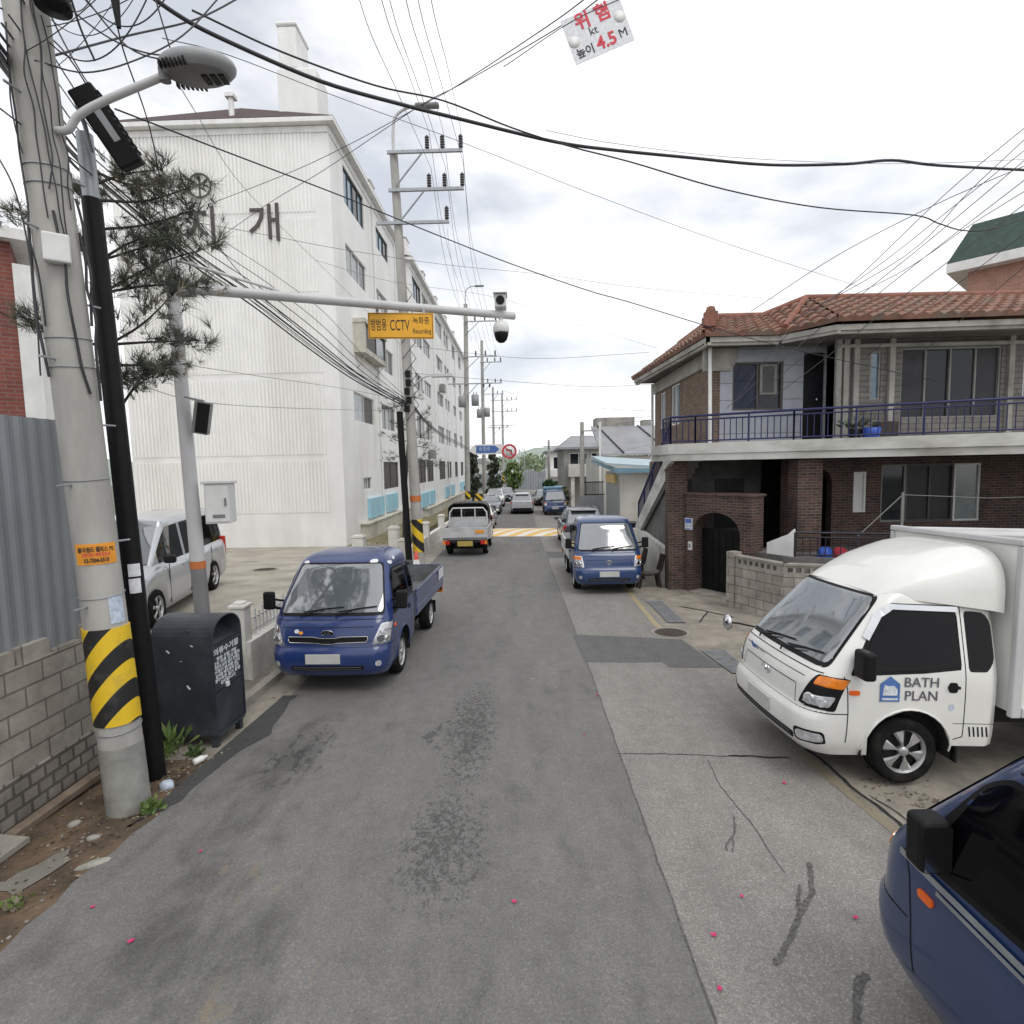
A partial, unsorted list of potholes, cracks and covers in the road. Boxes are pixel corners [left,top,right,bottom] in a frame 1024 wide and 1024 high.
manhole cover [651,627,690,638]
drain grate [647,600,685,623]
crack [851,971,870,1024]
crack [615,748,906,965]
drain grate [701,650,739,674]
